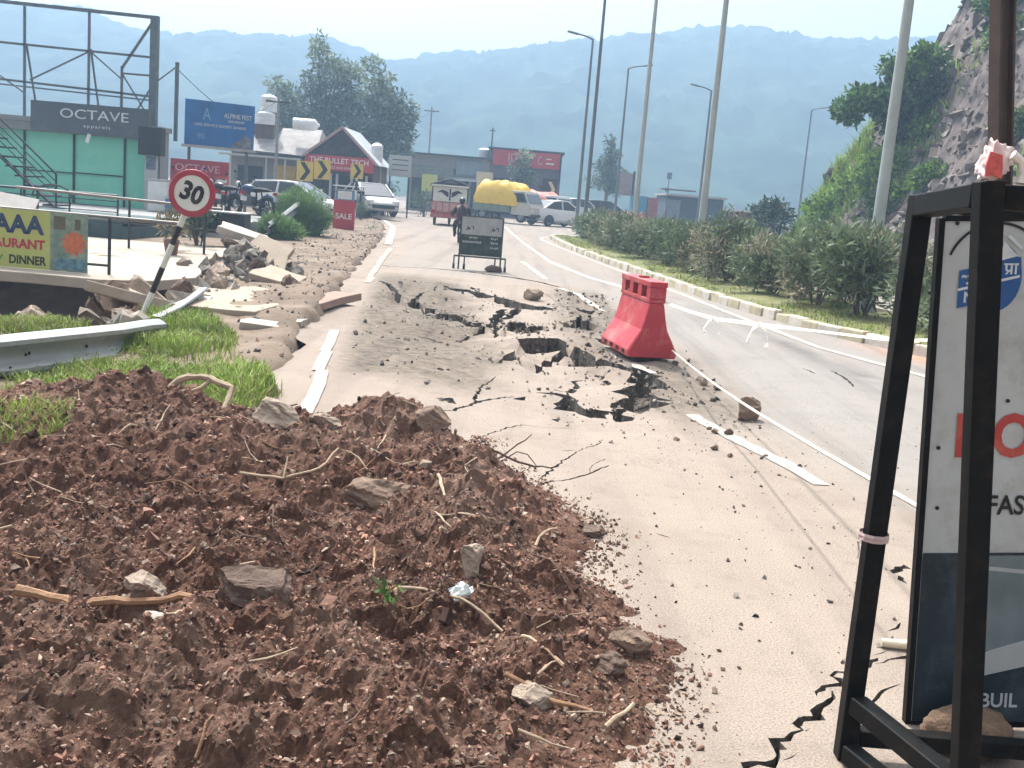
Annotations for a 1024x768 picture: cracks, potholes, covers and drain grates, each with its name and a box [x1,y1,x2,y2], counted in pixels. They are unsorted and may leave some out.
pothole [502,322,543,333]
crack [741,650,906,768]
pothole [567,317,589,331]
crack [541,440,609,484]
crack [375,264,677,437]
